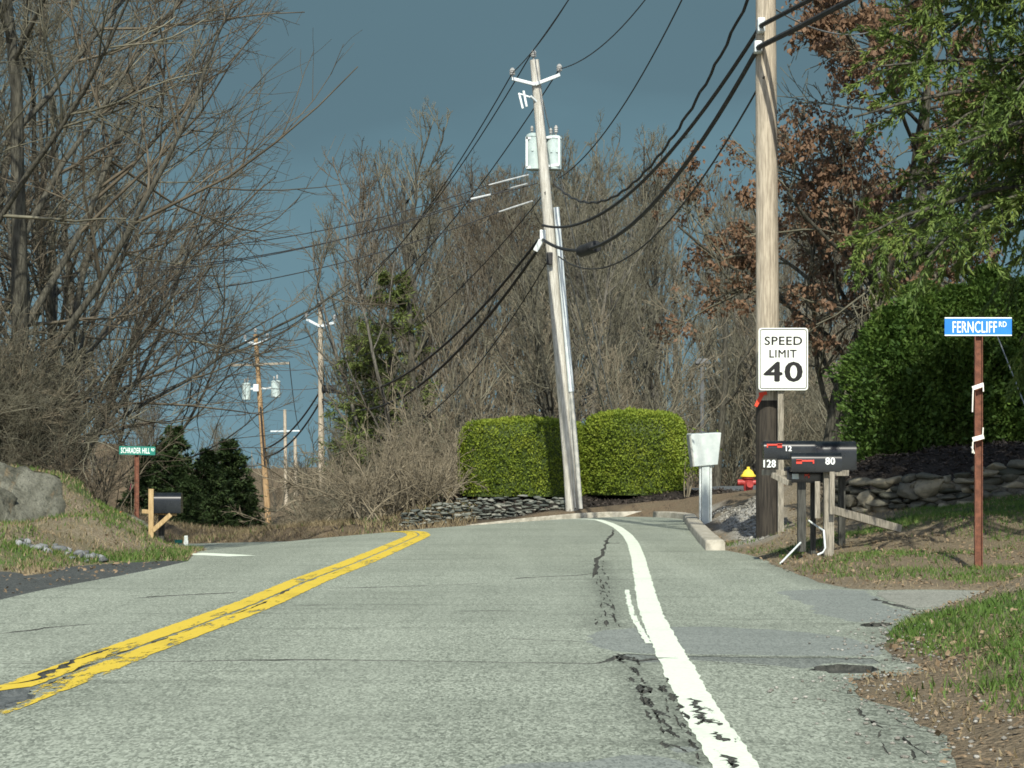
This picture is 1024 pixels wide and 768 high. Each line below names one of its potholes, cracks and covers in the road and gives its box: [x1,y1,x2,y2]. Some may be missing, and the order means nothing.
pothole [810,664,880,673]
crack [7,624,88,633]
